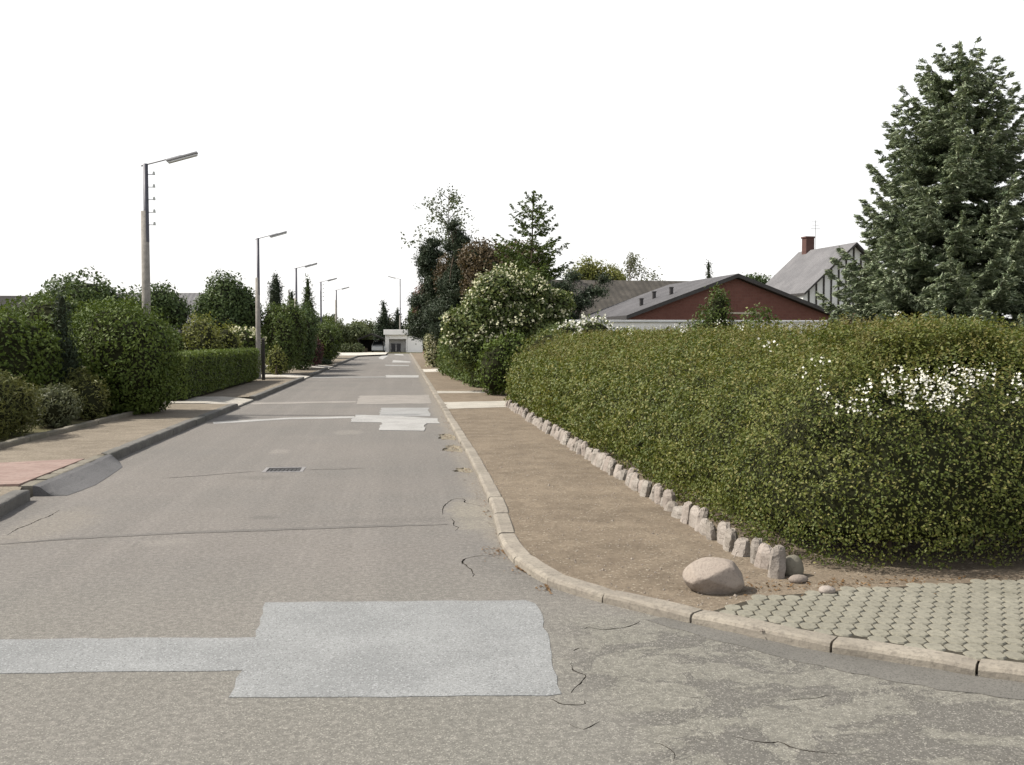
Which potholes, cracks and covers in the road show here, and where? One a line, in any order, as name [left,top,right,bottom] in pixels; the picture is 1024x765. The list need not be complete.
crack [550,648,586,705]
crack [733,736,847,756]
